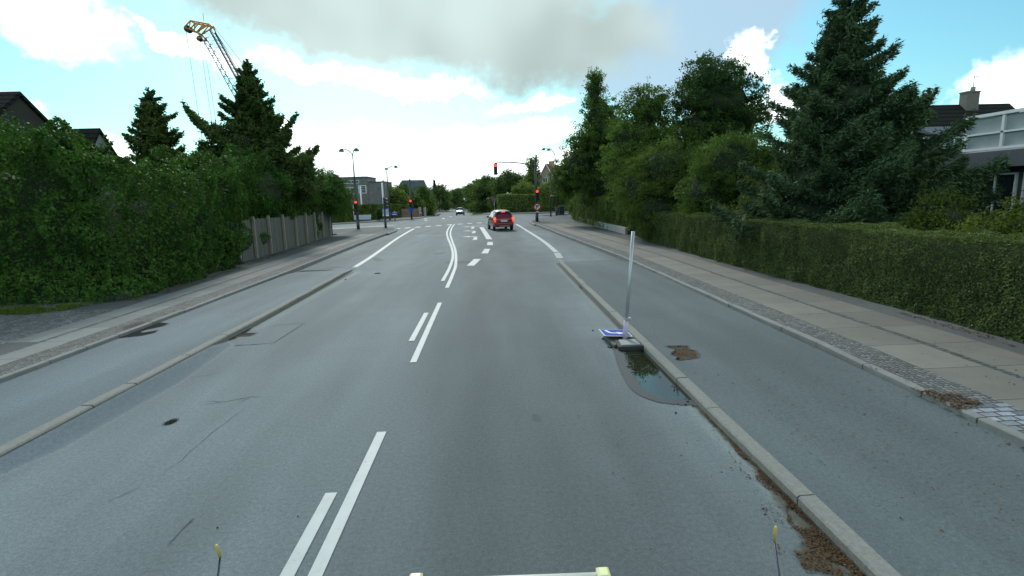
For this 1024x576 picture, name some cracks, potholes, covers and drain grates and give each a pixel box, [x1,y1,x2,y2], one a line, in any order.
pothole [666,345,699,360]
crack [162,396,266,475]
